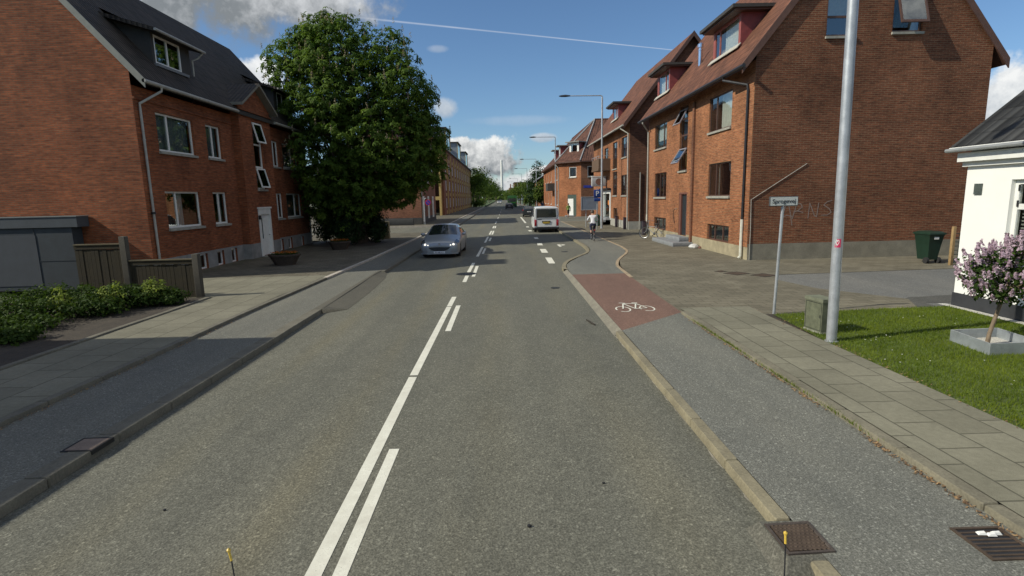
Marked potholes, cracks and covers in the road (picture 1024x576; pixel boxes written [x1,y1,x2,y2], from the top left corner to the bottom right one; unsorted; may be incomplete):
manhole cover [60,437,115,455]
manhole cover [764,521,836,556]
drain grate [949,526,1024,561]
